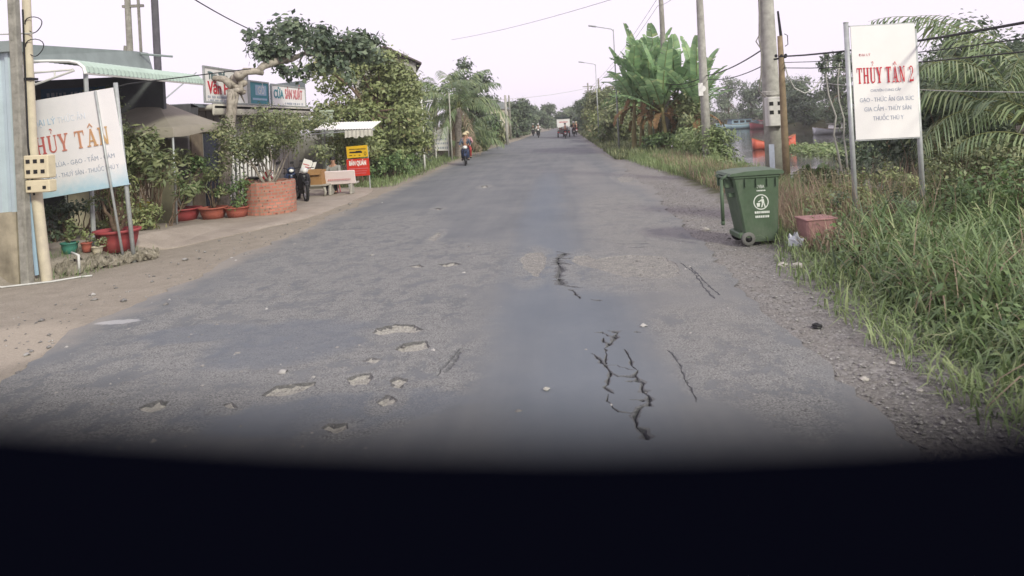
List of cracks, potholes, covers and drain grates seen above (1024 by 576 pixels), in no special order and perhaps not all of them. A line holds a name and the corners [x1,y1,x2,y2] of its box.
pothole [261,382,316,396]
crack [437,348,469,376]
pothole [373,324,424,335]
crack [551,252,603,301]
pothole [139,399,169,412]
crack [592,331,697,426]
pothole [347,373,374,386]
pothole [390,377,408,389]
pothole [395,341,430,352]
pothole [376,395,398,407]
crack [681,263,720,299]
